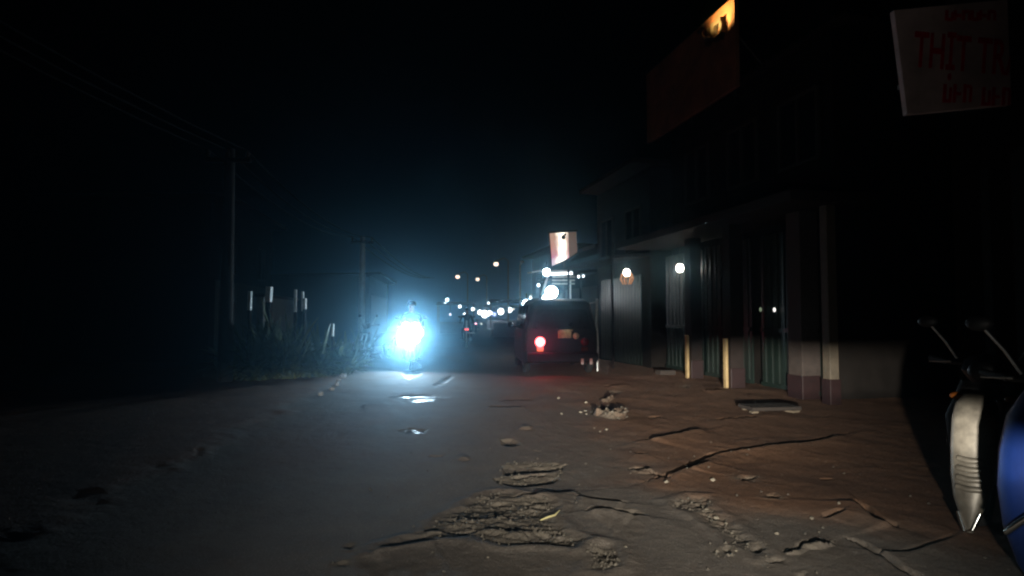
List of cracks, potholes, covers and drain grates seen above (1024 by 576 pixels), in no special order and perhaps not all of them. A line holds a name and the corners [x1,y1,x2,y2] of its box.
crack [636,416,851,479]
pothole [493,471,563,488]
pothole [671,494,769,556]
pothole [502,461,568,476]
pothole [782,539,837,556]
pothole [590,405,630,420]
pothole [373,489,592,550]
crack [510,473,631,512]
pothole [386,393,451,403]
